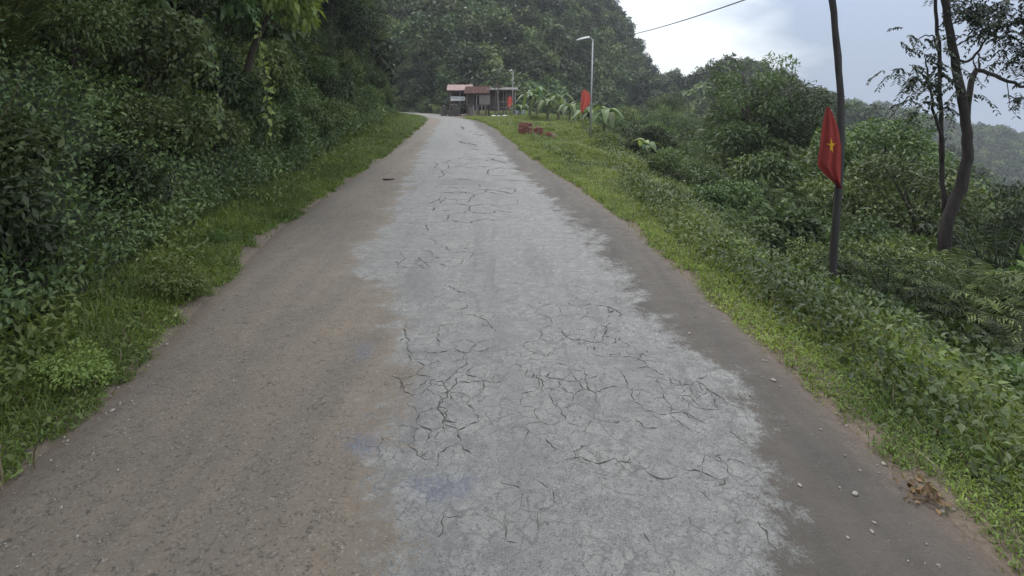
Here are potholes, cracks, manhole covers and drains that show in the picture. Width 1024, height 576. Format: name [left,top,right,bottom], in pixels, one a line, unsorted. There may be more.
crack [516,287,745,502]
crack [758,521,780,560]
crack [501,478,554,543]
crack [368,126,521,467]
